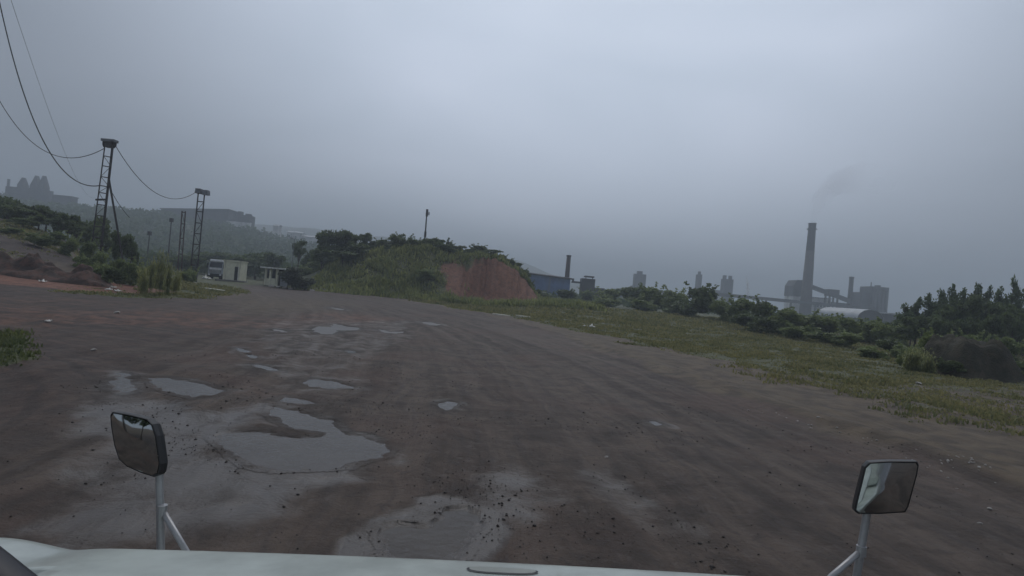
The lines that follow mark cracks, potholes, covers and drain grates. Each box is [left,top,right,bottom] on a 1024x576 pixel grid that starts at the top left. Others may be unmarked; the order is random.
pothole [428,399,468,412]
pothole [133,375,233,399]
pothole [270,394,333,406]
pothole [243,363,288,372]
pothole [366,500,493,561]
pothole [304,323,367,335]
pothole [98,371,151,396]
pothole [203,404,402,474]
pothole [295,377,362,390]
